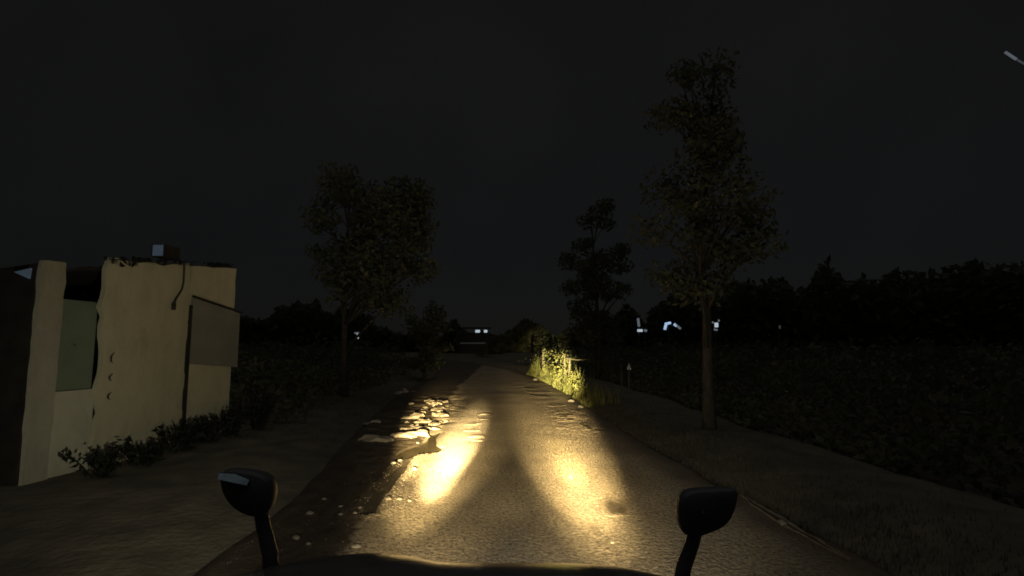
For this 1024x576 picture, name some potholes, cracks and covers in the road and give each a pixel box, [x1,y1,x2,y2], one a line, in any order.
pothole [598,497,633,517]
